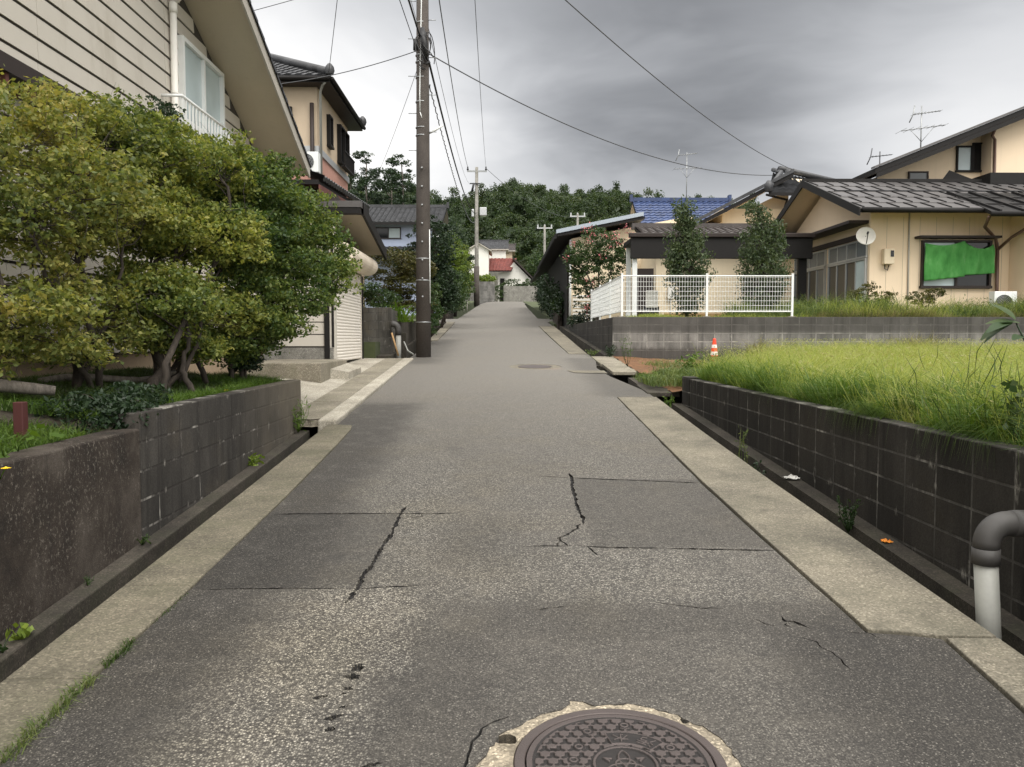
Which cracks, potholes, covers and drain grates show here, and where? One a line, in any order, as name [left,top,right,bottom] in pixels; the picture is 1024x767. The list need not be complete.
crack [540,473,775,555]
crack [199,508,448,604]
crack [463,718,505,767]
manhole cover [476,701,741,767]
